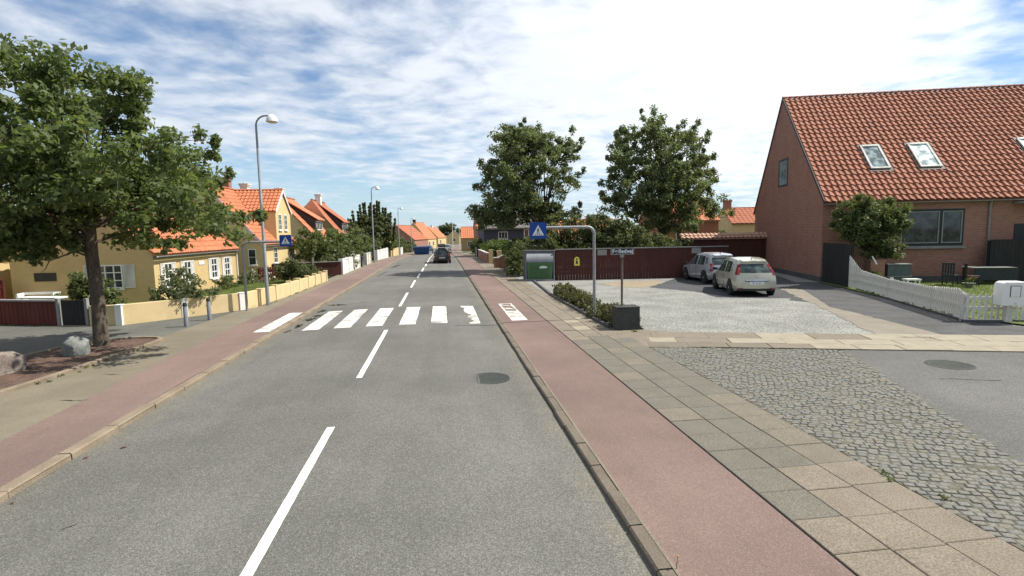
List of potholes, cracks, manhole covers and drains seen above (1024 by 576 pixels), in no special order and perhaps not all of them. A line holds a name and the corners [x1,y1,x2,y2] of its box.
manhole cover [924,360,977,370]
manhole cover [472,373,510,384]
